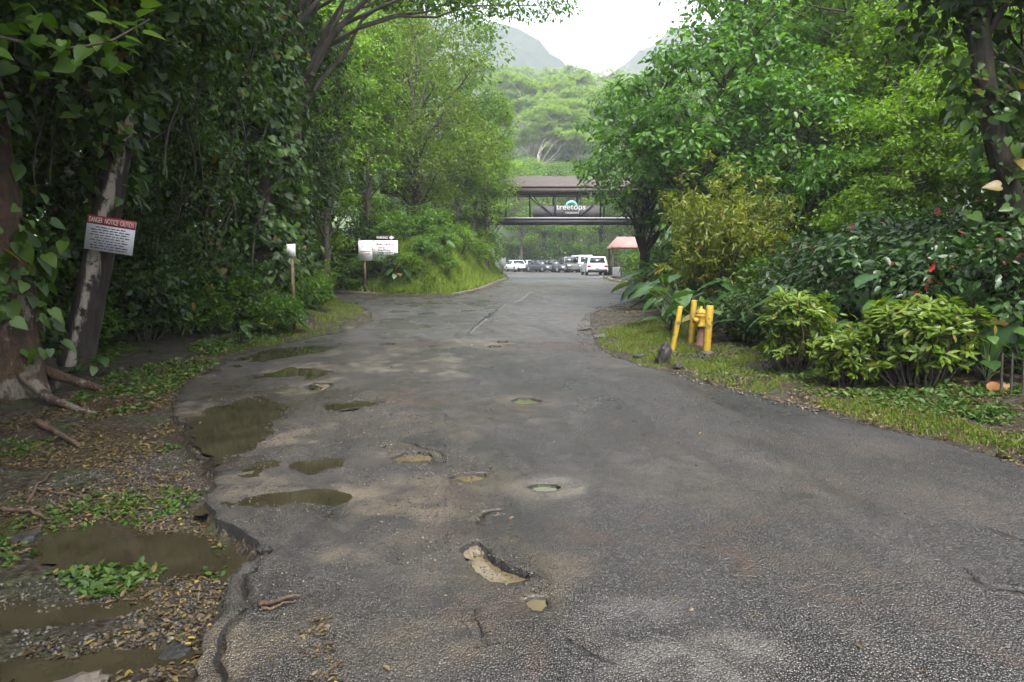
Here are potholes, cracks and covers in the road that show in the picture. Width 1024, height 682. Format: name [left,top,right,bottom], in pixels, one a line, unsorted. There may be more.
pothole [525,597,548,611]
pothole [392,452,432,462]
crack [461,608,500,648]
crack [195,559,271,682]
crack [948,567,1024,598]
pothole [460,542,530,584]
pothole [452,473,485,482]
